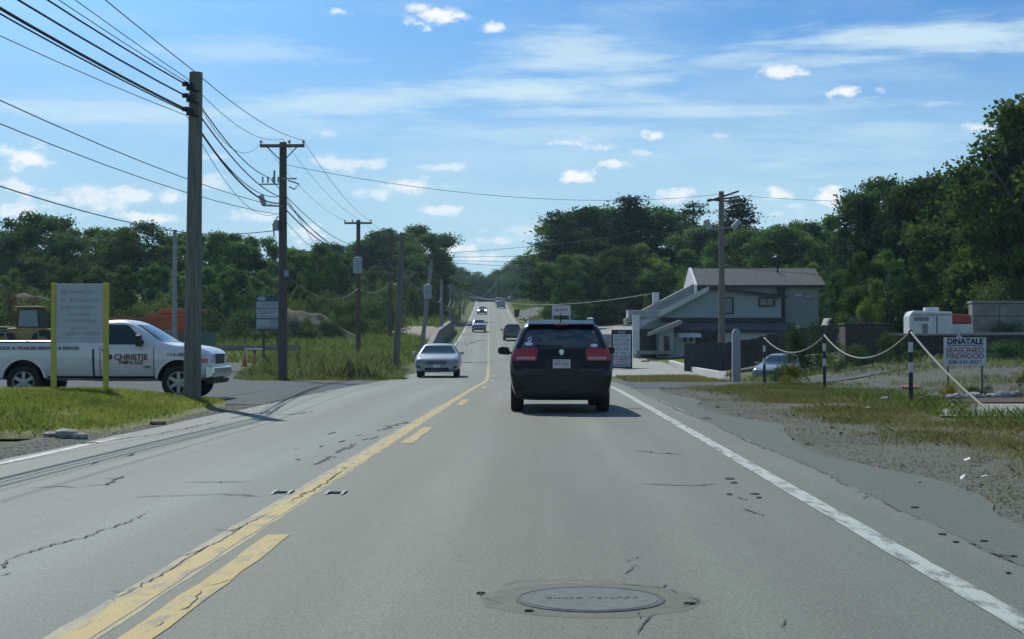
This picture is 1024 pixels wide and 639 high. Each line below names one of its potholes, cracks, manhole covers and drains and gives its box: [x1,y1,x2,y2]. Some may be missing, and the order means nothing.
crack [295,421,409,469]
crack [26,461,256,500]
crack [1,513,145,574]
manhole cover [516,586,665,612]
